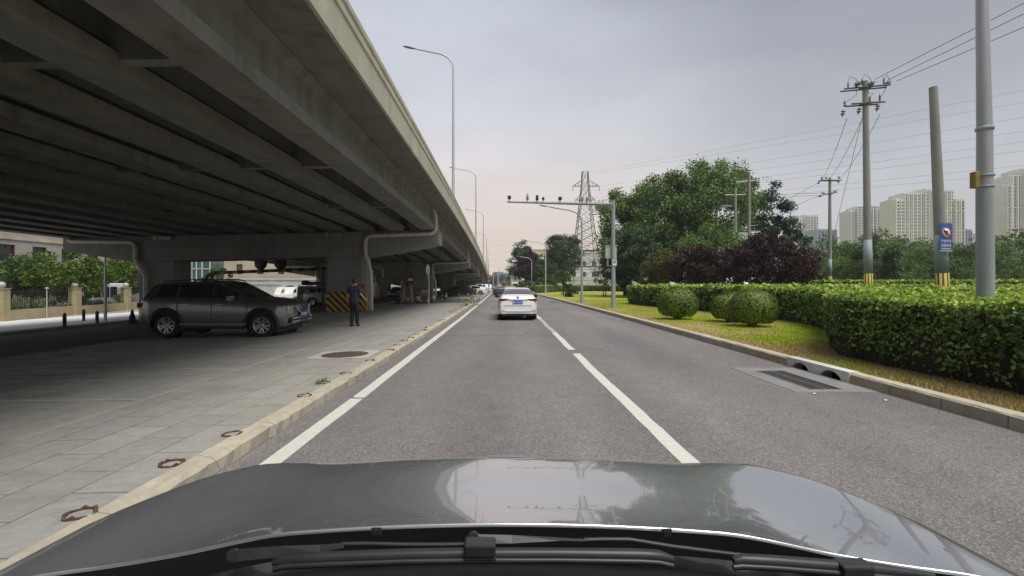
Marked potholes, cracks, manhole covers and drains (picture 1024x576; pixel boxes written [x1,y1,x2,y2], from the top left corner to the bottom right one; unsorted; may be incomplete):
drain grate [731,368,879,392]
manhole cover [306,350,380,359]
